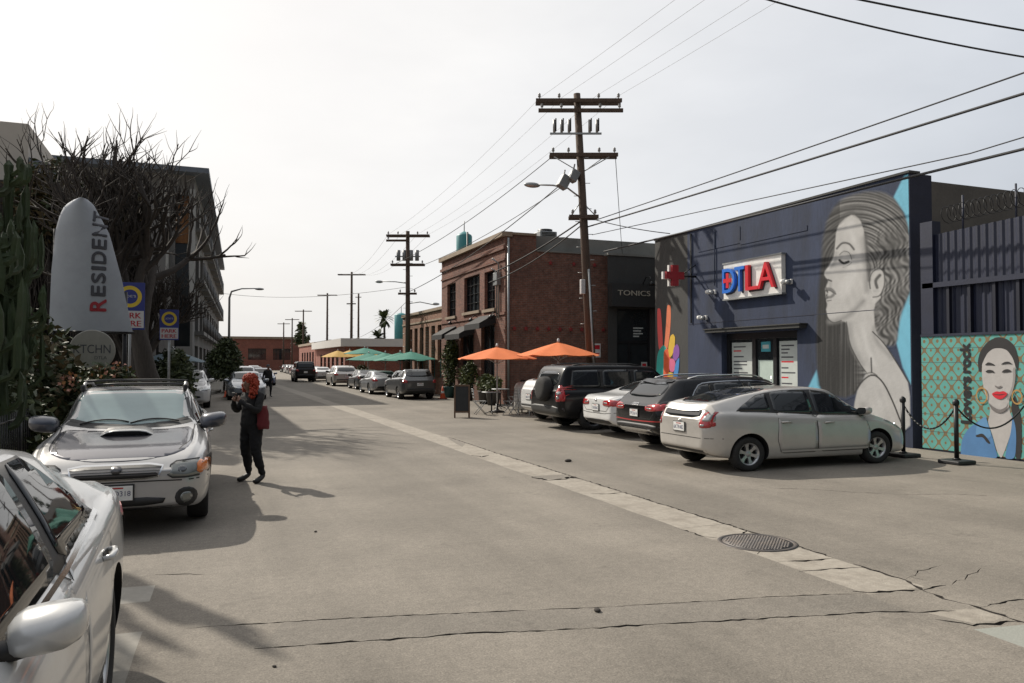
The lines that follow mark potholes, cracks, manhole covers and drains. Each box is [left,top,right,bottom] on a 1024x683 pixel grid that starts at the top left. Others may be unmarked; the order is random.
manhole cover [717,533,798,552]
crack [197,564,1024,649]
